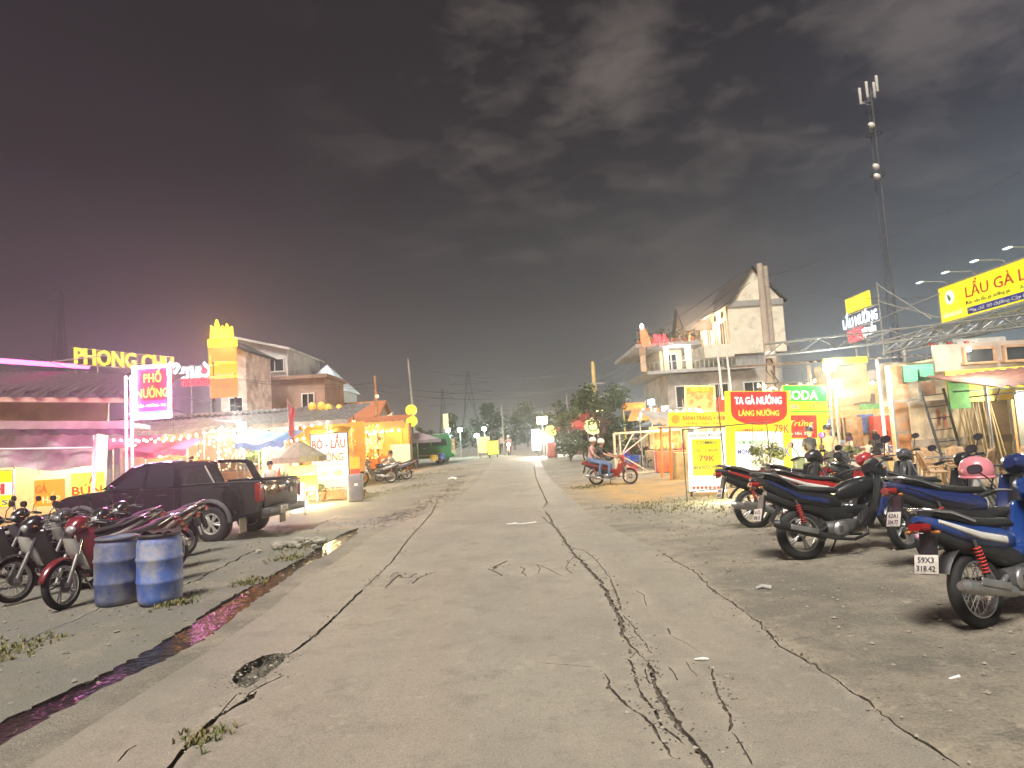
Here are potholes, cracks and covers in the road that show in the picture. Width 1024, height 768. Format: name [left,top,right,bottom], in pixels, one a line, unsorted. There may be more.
crack [487,466,960,768]
pothole [232,653,287,688]
crack [167,480,467,768]
